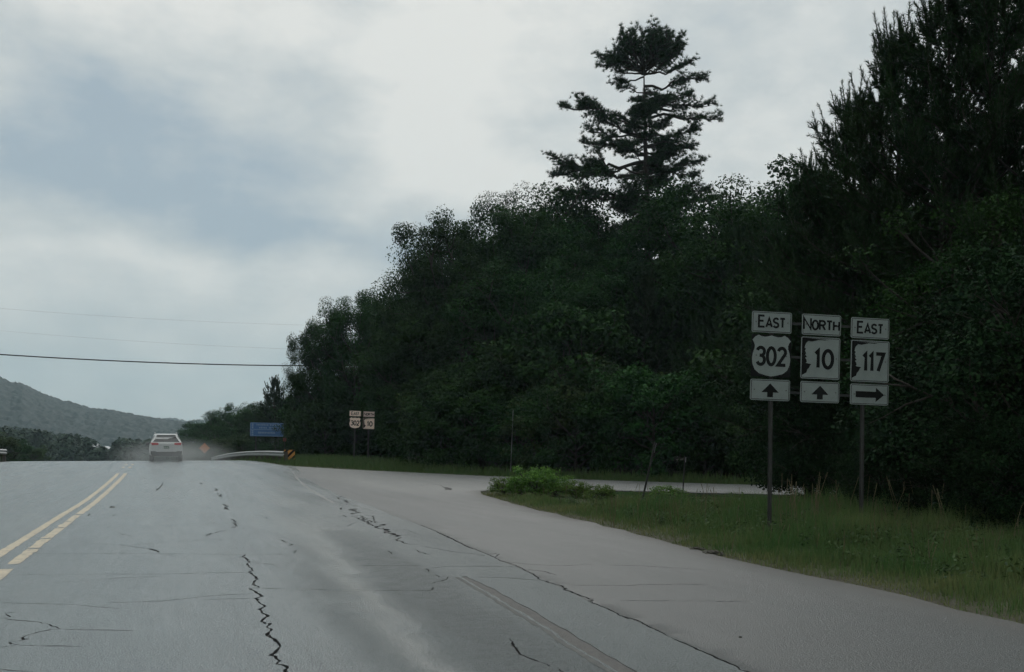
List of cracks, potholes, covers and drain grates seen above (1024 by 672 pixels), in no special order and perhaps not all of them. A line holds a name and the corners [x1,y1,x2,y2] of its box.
crack [5,496,466,672]
crack [33,483,237,554]
crack [421,525,749,672]
